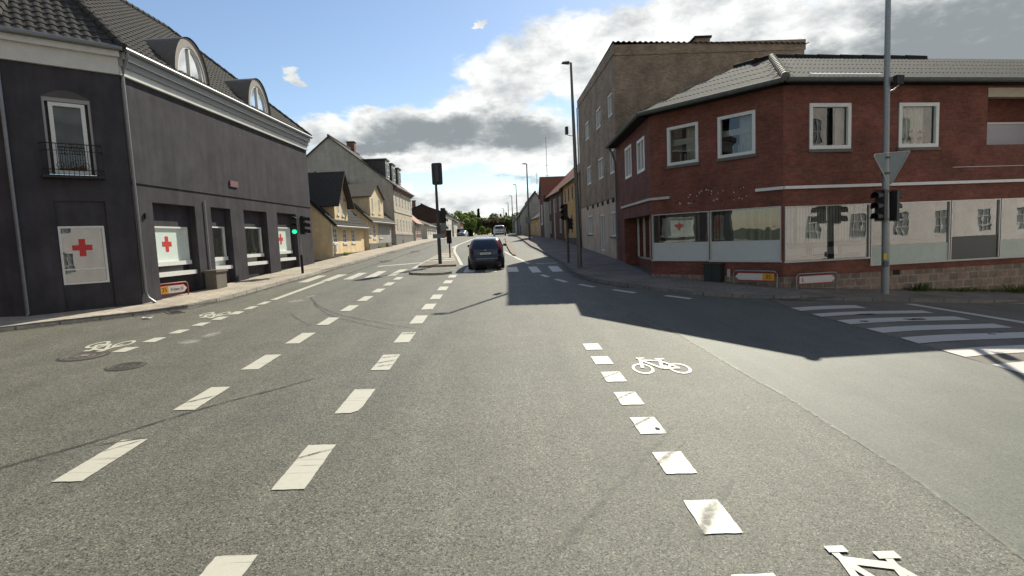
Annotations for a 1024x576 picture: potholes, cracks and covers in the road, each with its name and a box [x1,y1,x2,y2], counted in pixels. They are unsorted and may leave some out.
manhole cover [104,361,147,371]
manhole cover [56,351,111,362]
